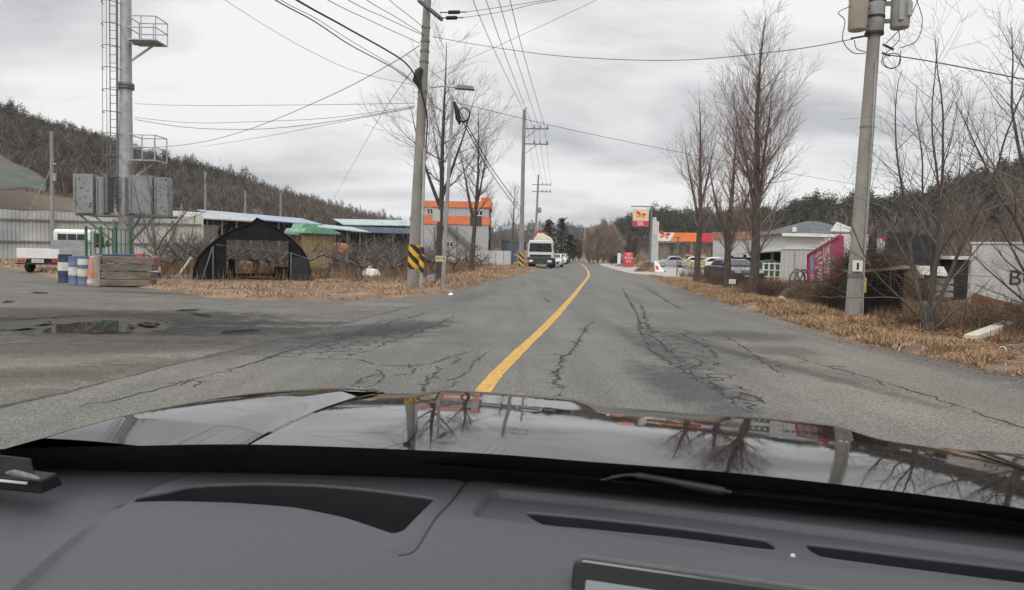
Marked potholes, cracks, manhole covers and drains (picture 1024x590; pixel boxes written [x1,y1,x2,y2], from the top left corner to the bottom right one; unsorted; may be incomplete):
crack [621,287,765,415]
pothole [0,315,180,335]
crack [81,312,508,406]
crack [797,356,1024,428]
crack [546,321,594,397]
